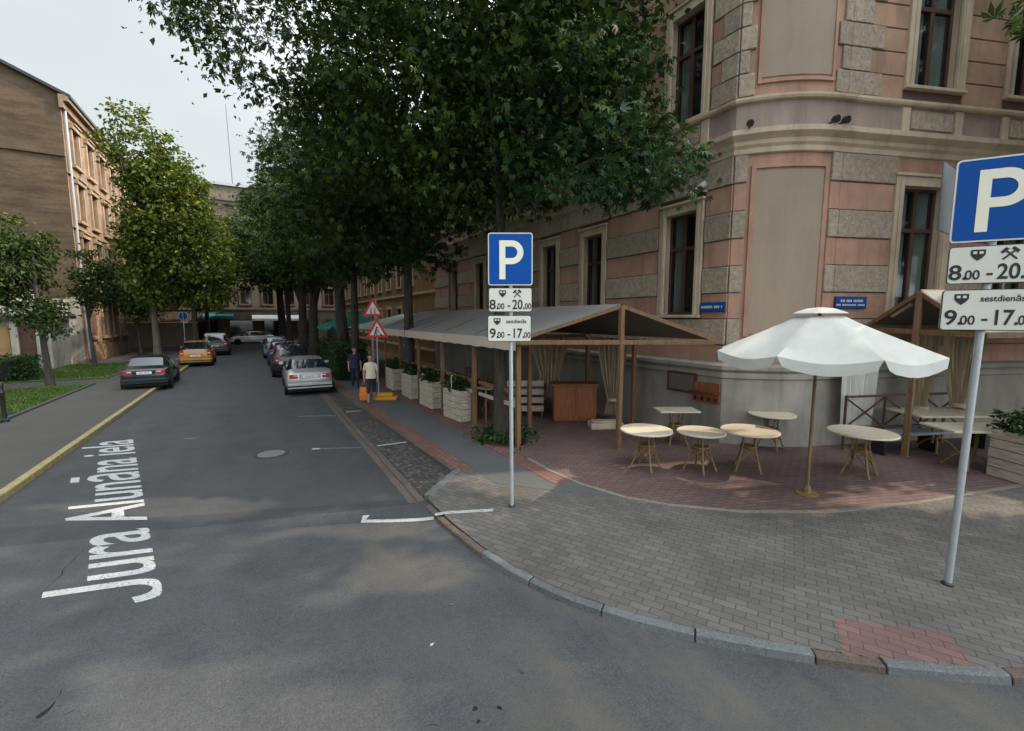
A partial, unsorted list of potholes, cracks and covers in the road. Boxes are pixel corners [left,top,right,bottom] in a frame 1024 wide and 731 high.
manhole cover [254,449,289,459]
